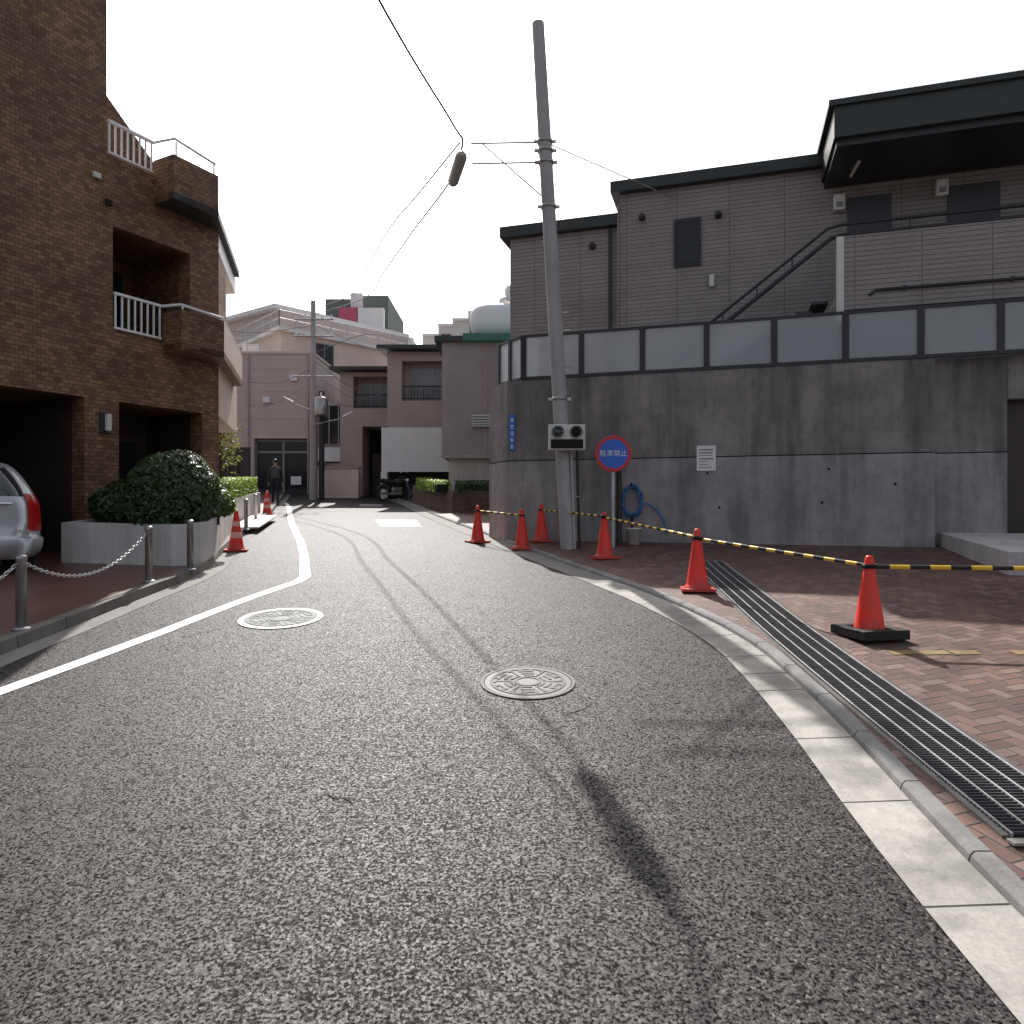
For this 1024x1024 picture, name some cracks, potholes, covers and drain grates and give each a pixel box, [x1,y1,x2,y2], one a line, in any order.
drain grate [689,561,1024,846]
manhole cover [480,666,575,700]
manhole cover [238,608,323,629]
